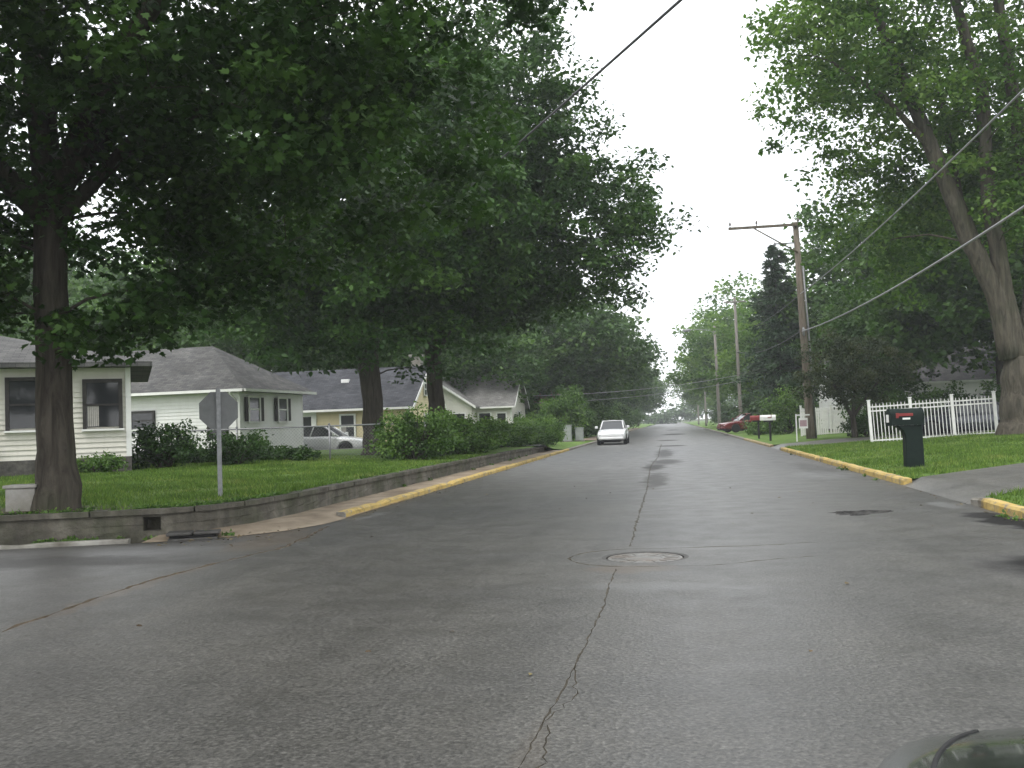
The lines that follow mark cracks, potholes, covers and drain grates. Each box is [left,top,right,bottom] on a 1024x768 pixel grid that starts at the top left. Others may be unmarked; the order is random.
manhole cover [602,551,689,563]
crack [3,526,329,632]
drain grate [166,529,221,542]
